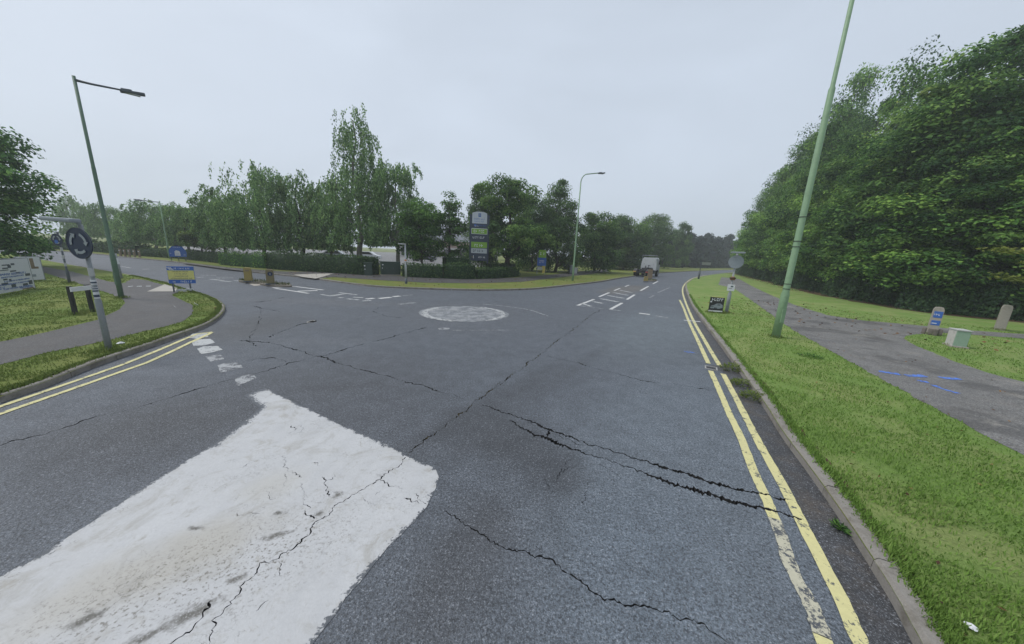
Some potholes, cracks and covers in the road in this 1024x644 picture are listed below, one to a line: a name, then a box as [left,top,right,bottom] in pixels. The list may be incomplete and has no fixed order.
crack [171,426,424,644]
crack [446,511,728,643]
crack [482,405,802,520]
crack [0,328,423,446]
